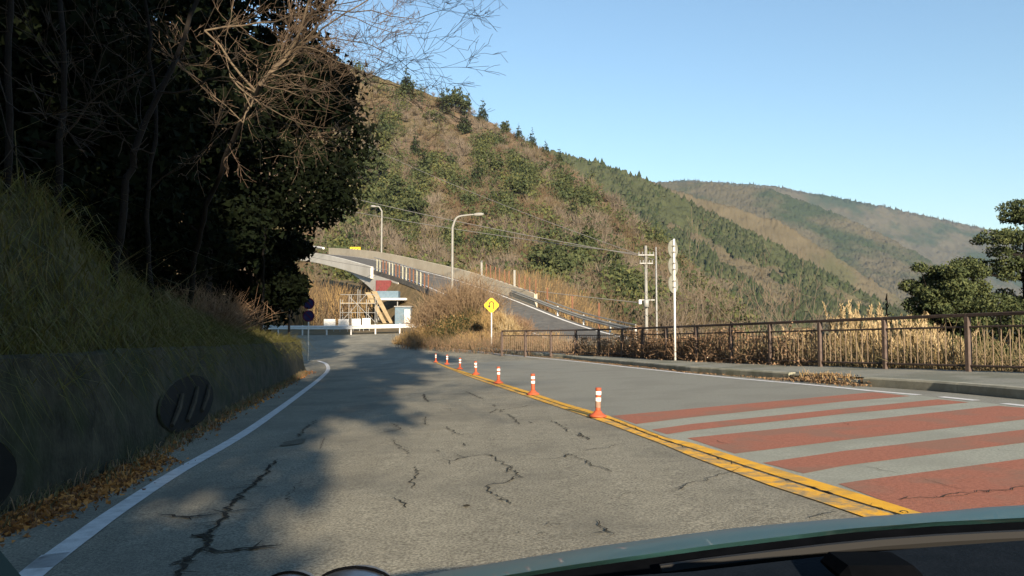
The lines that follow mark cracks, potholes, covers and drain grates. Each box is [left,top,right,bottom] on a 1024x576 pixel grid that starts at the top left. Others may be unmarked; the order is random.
crack [382,424,420,508]
crack [157,460,302,576]
crack [896,480,1022,500]
crack [438,391,616,504]
